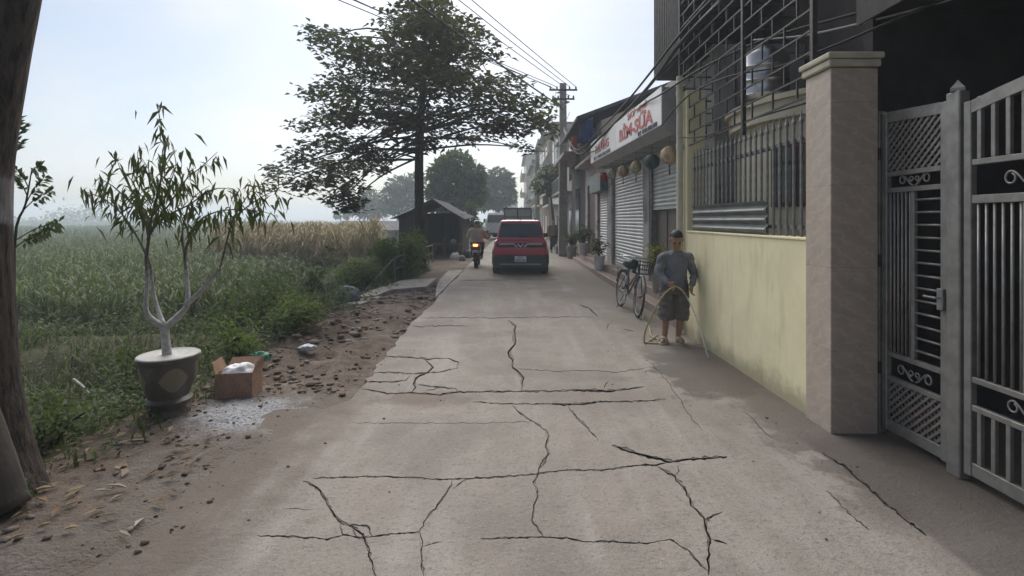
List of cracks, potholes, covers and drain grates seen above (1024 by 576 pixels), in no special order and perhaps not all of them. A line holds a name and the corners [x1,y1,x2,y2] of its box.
crack [822,452,927,536]
crack [258,320,727,576]
